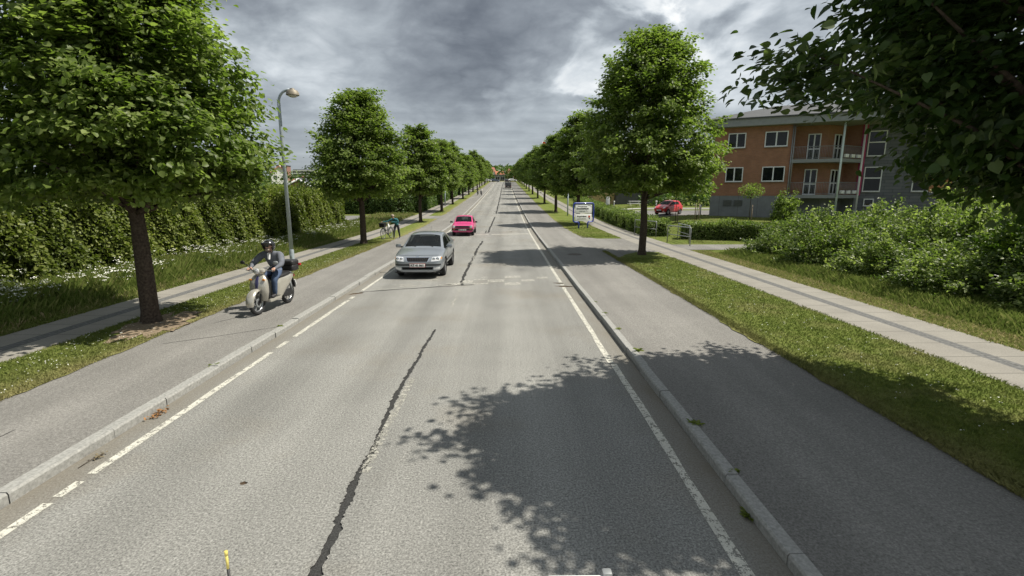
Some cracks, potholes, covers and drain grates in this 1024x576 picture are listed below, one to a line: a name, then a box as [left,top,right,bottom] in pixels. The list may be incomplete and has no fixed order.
crack [367,185,503,292]
